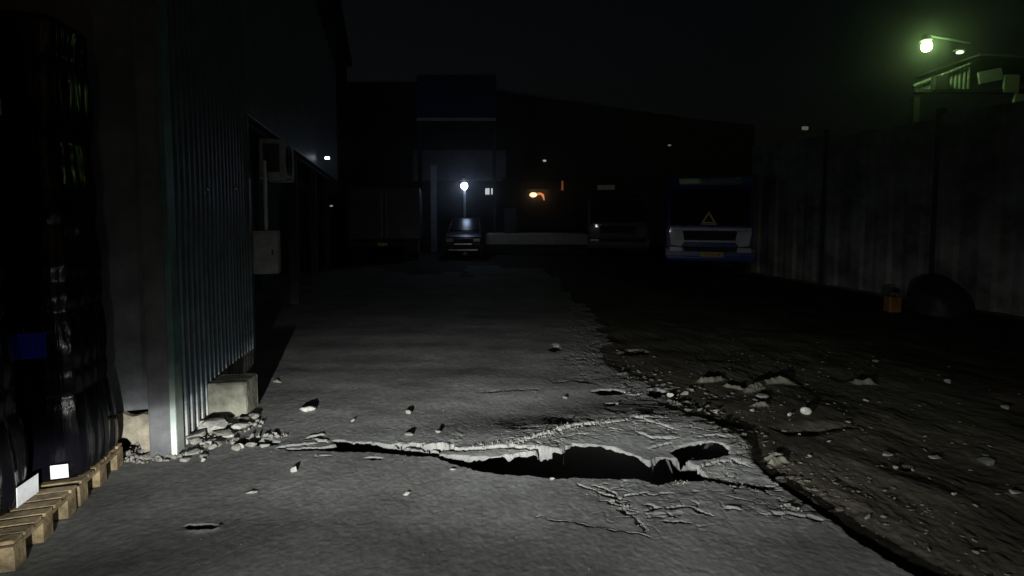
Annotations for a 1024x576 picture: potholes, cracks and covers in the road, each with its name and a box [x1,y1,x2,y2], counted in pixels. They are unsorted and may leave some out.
pothole [664,440,732,482]
crack [535,457,825,538]
pothole [283,439,481,469]
pothole [437,442,710,486]
pothole [181,523,222,531]
